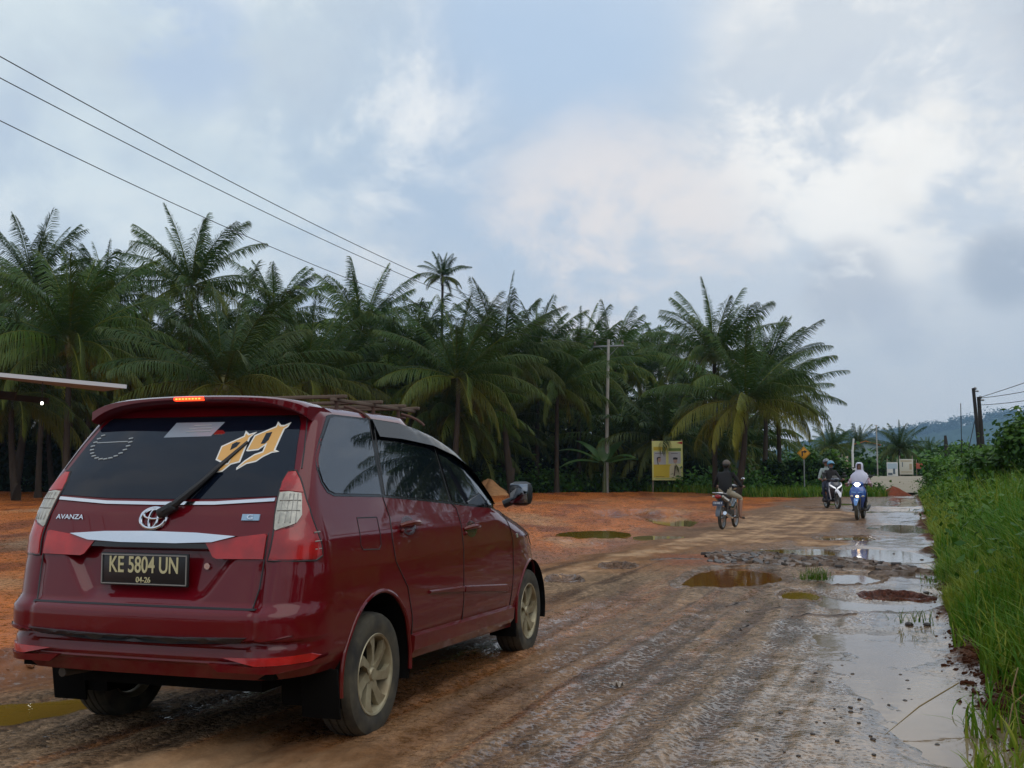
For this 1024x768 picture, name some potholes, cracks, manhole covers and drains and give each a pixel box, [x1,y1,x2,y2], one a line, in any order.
pothole [856,589,938,602]
pothole [669,564,797,590]
pothole [816,568,889,585]
pothole [598,561,639,569]
pothole [777,588,823,602]
pothole [544,573,585,583]
